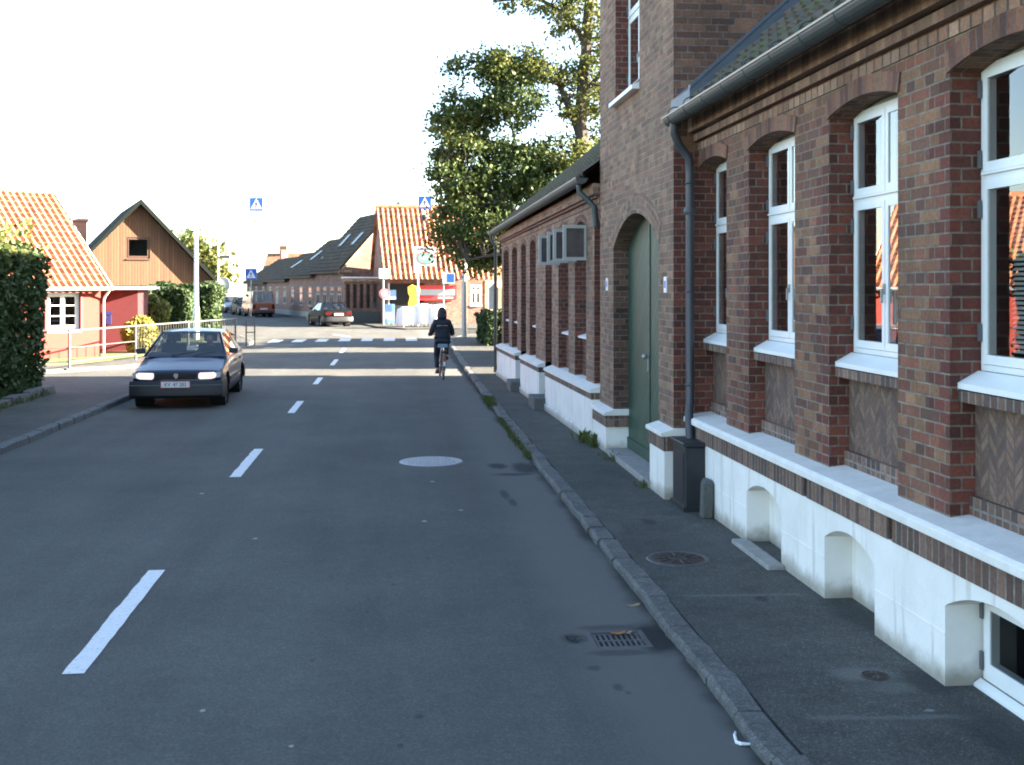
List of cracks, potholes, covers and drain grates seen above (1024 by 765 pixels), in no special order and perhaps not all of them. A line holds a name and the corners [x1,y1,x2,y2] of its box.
manhole cover [859,670,891,681]
drain grate [584,630,653,649]
manhole cover [646,551,710,567]
manhole cover [399,456,463,467]
